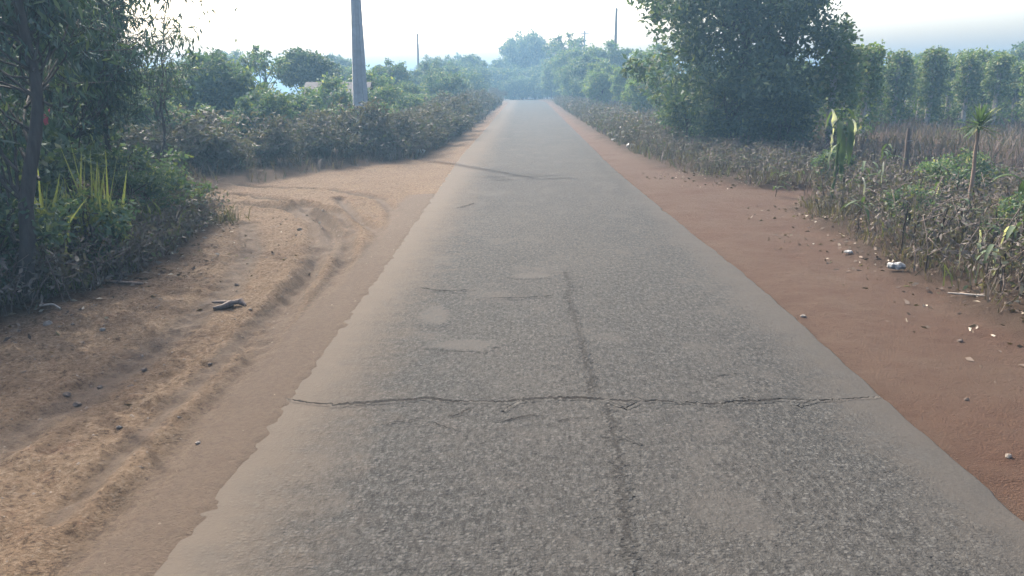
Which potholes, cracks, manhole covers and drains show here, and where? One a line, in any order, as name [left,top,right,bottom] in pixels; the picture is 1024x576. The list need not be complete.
crack [285,271,881,576]
